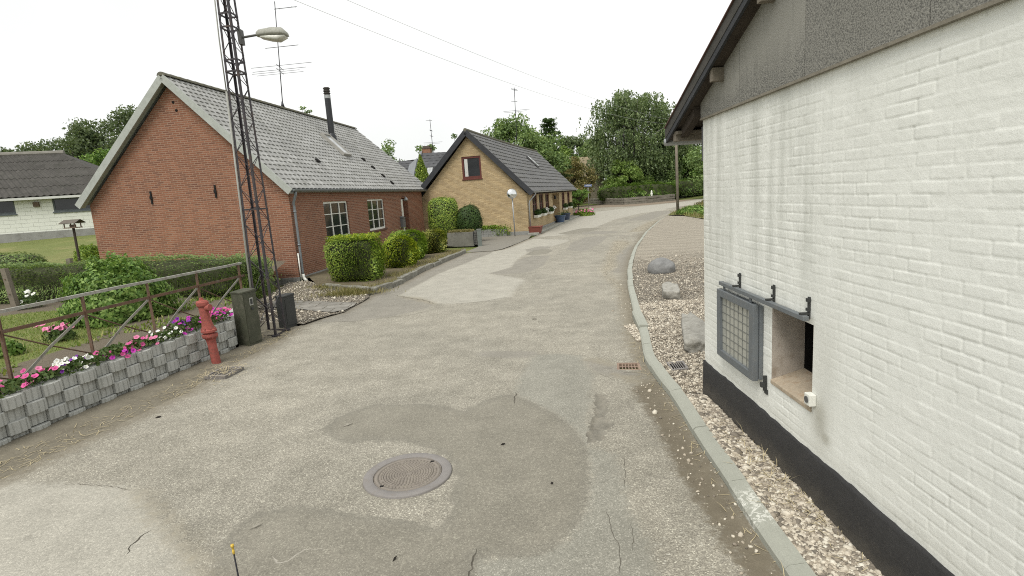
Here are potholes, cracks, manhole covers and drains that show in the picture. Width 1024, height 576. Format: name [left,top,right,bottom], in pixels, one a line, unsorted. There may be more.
crack [606,459,634,572]
drain grate [666,361,689,371]
manhole cover [363,453,452,499]
